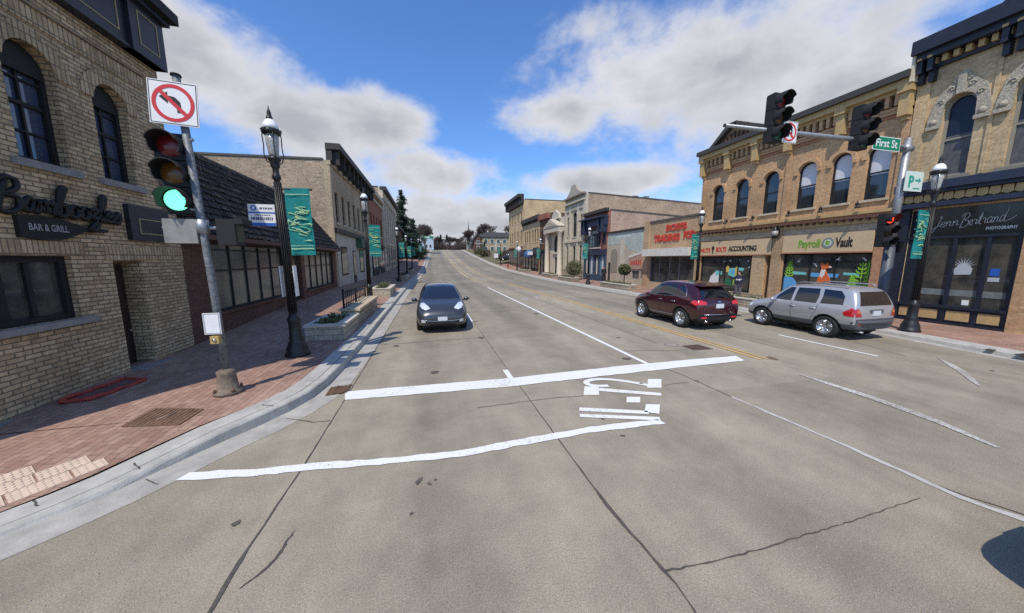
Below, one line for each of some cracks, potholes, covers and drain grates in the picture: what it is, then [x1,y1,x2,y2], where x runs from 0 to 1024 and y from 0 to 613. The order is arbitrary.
manhole cover [121,408,204,427]
drain grate [325,384,352,396]
crack [207,286,414,613]
crack [666,497,920,571]
